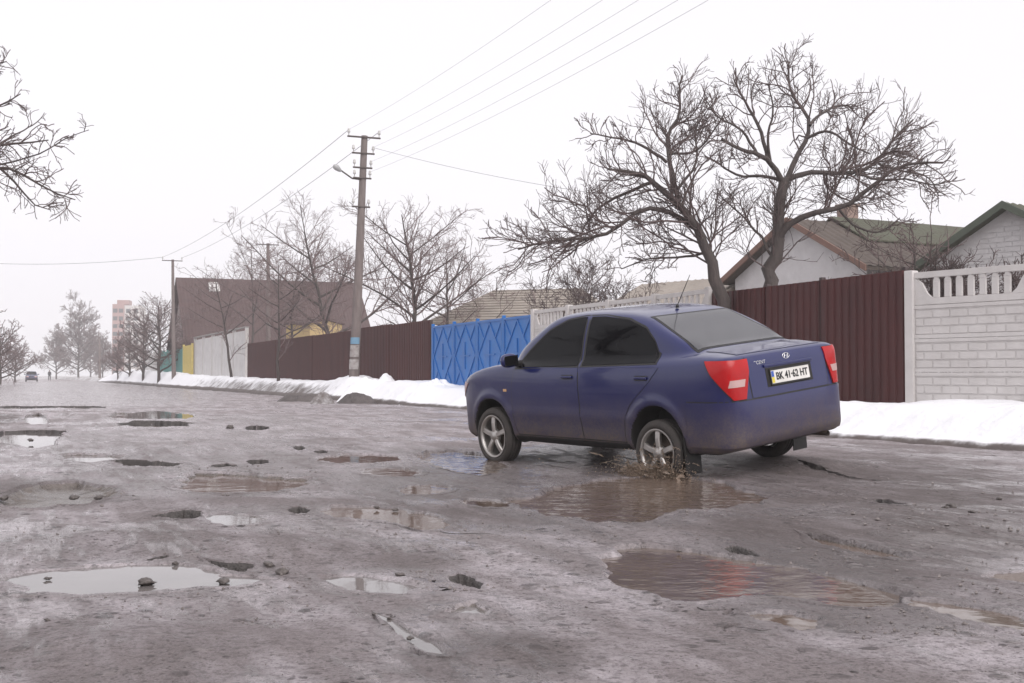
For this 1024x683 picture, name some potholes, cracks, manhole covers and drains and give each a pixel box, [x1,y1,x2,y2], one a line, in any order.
crack [790,459,878,480]
pothole [793,529,923,561]
pothole [896,595,1024,635]
pothole [308,452,411,464]
pothole [313,503,462,532]
pothole [304,571,439,596]
pothole [582,541,932,610]
pothole [0,478,134,510]
pothole [103,459,200,467]
pothole [0,430,70,449]
pothole [407,449,517,477]
pothole [165,470,329,494]
